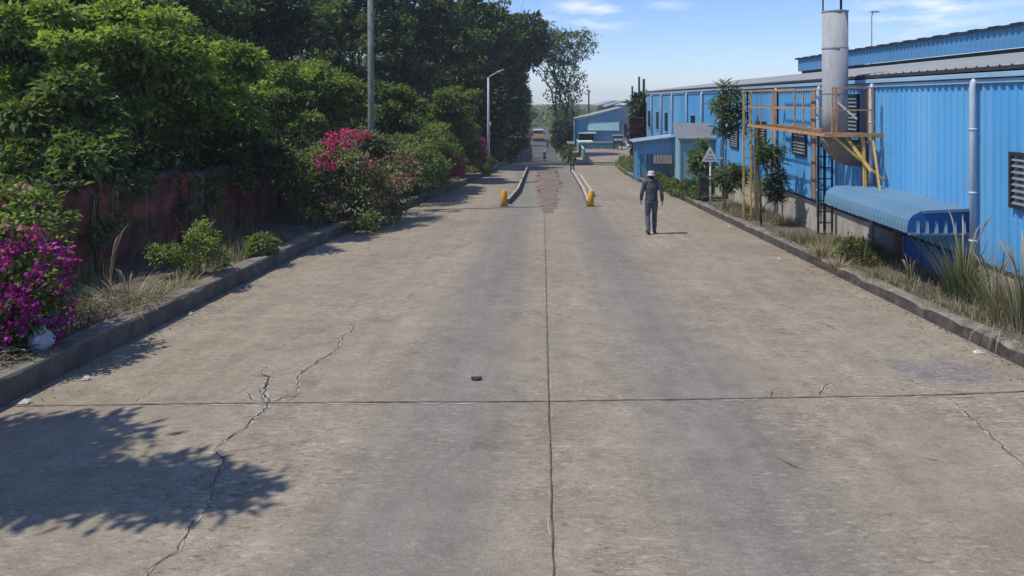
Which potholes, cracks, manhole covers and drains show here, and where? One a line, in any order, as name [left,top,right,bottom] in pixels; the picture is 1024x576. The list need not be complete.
crack [145,320,357,576]
crack [927,397,1024,467]
crack [818,383,834,396]
